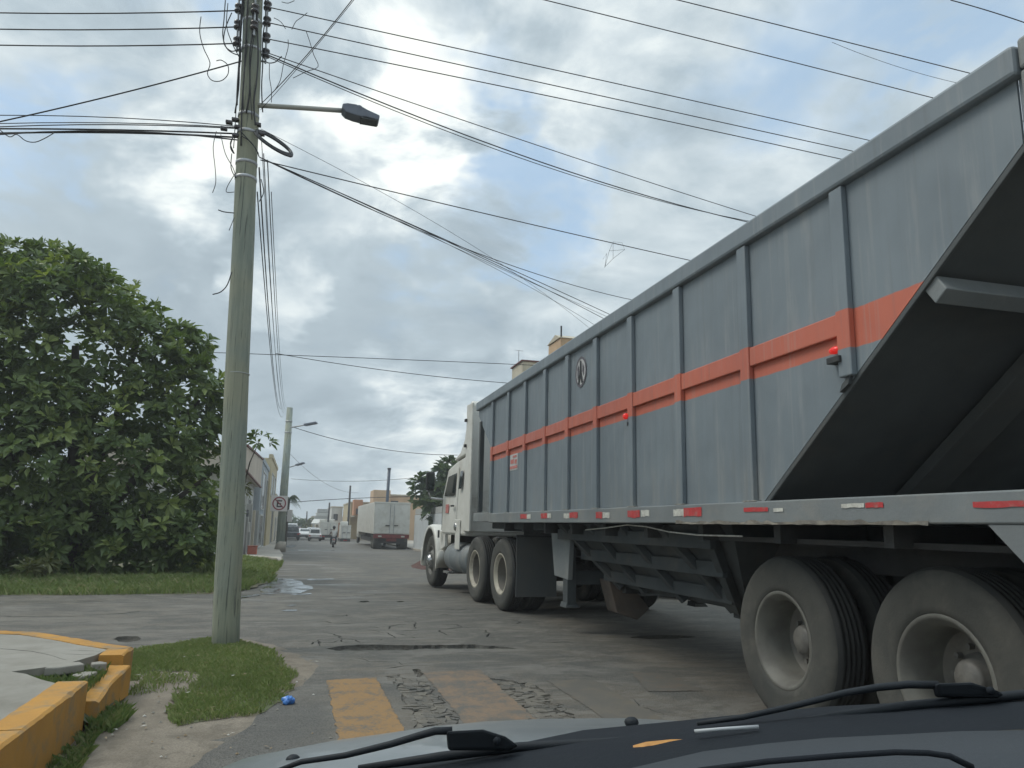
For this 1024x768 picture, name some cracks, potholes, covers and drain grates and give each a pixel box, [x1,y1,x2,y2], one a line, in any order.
crack [483,673,596,719]
crack [311,615,460,729]
